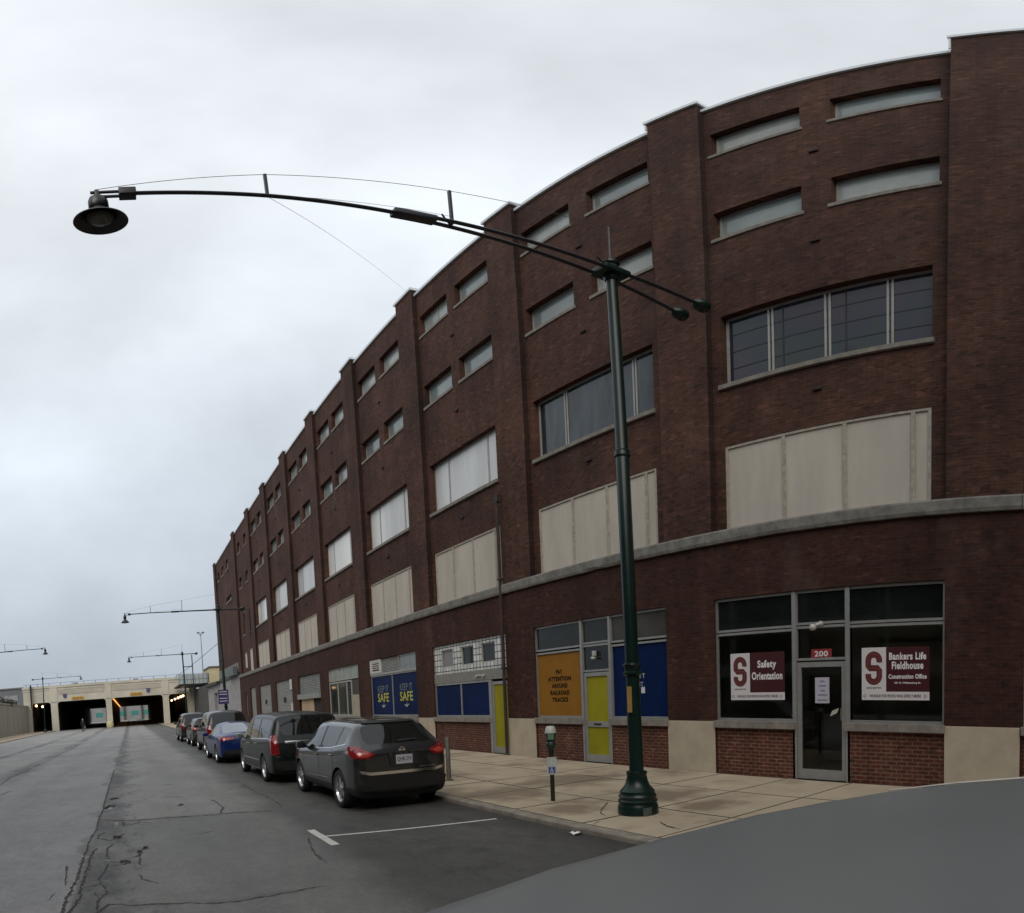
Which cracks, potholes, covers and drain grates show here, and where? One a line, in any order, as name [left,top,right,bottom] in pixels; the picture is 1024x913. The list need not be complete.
crack [308,838,327,863]
crack [49,784,323,913]
